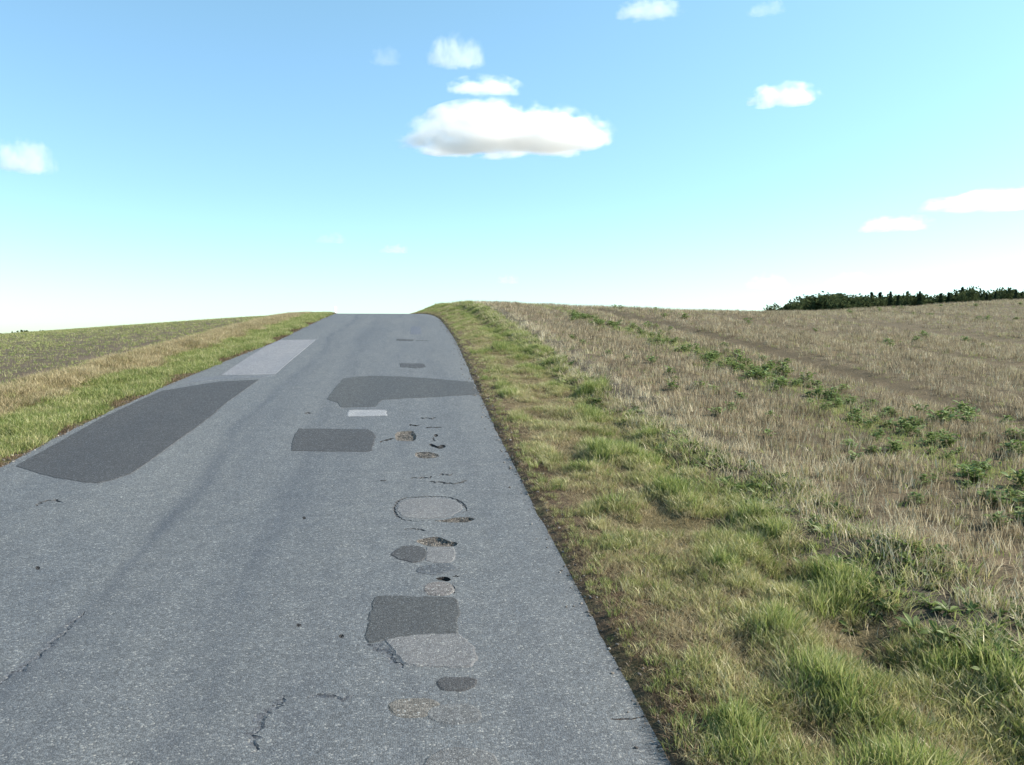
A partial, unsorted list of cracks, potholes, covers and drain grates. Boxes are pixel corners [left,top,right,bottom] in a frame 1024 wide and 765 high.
crack [0,611,85,685]
pothole [416,537,458,547]
pothole [395,431,417,441]
crack [307,693,354,702]
crack [365,643,404,668]
crack [244,696,287,755]
